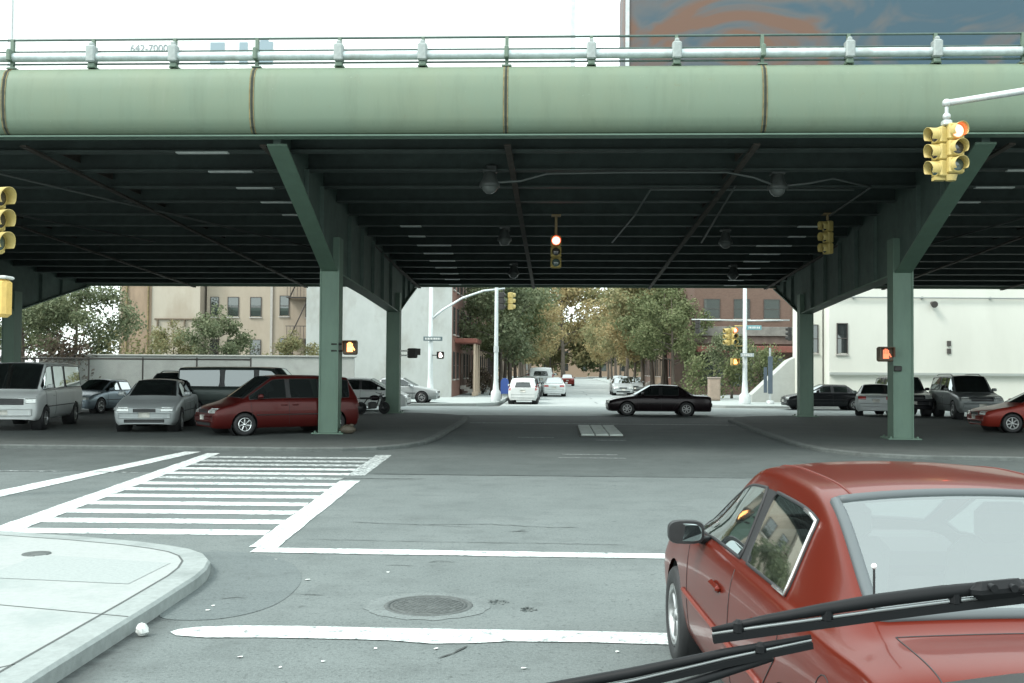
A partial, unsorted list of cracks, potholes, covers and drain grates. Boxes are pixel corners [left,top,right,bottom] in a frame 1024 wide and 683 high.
crack [329,522,628,545]
manhole cover [384,595,473,616]
